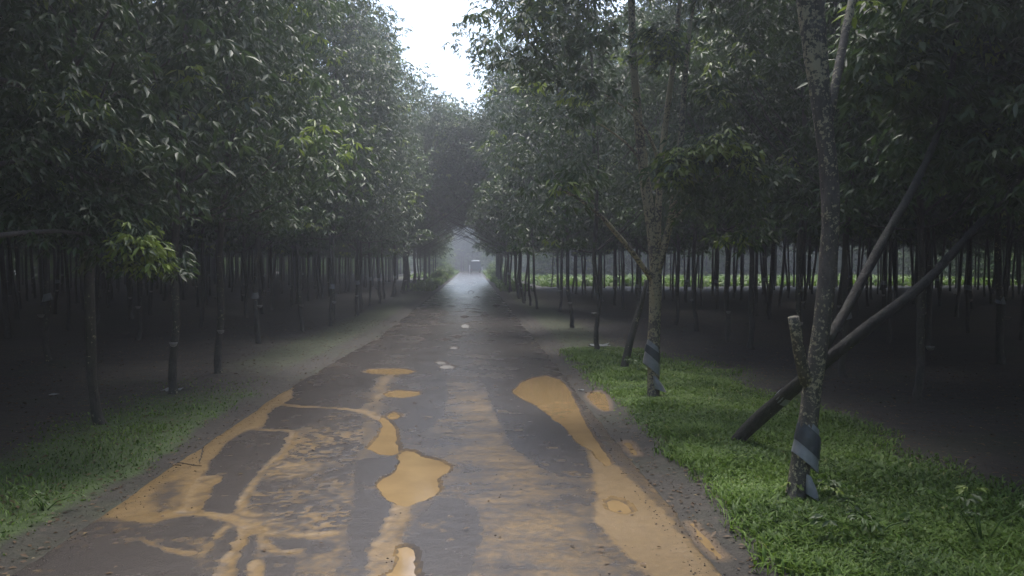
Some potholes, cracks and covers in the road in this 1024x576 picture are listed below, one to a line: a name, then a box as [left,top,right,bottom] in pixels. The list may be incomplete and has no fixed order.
pothole [602,496,638,514]
pothole [378,543,425,576]
